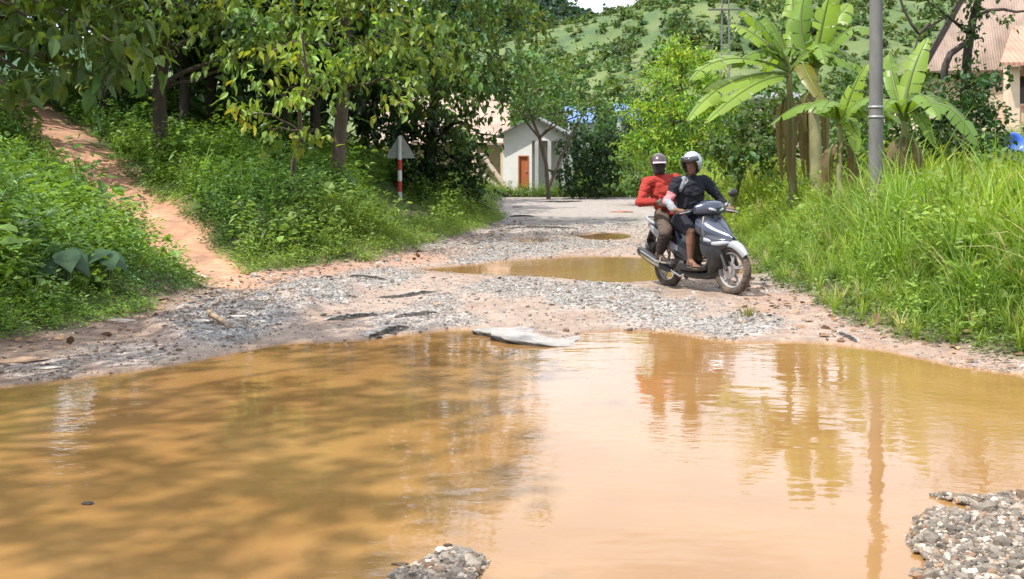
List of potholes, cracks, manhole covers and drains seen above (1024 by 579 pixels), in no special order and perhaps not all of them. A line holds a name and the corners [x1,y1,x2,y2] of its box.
crack [317,274,438,339]
pothole [554,231,644,240]
pothole [408,254,674,283]
pothole [0,323,1024,579]
